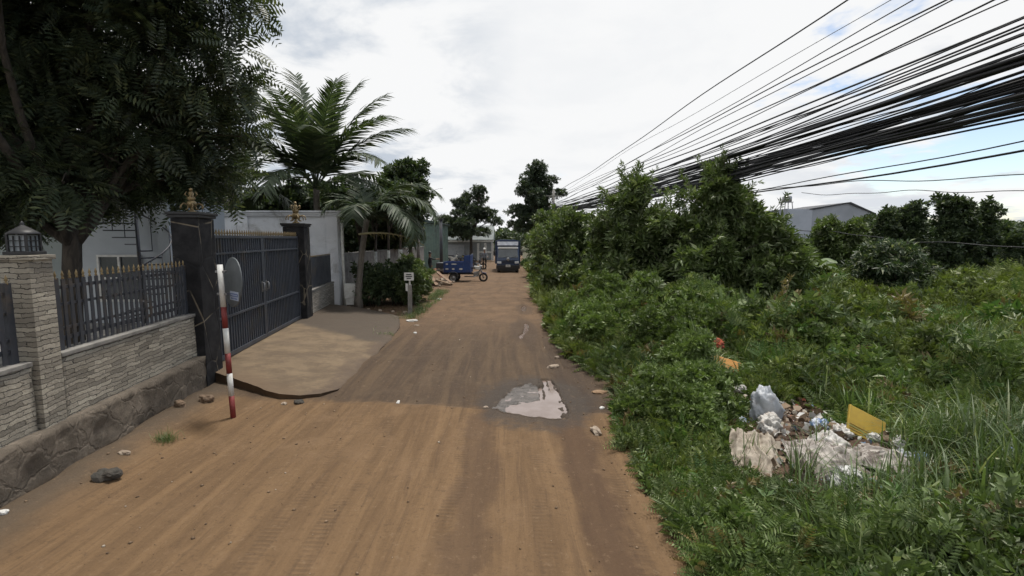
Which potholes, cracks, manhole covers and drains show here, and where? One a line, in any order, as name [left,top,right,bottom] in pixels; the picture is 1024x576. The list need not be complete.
pothole [485,378,571,420]
